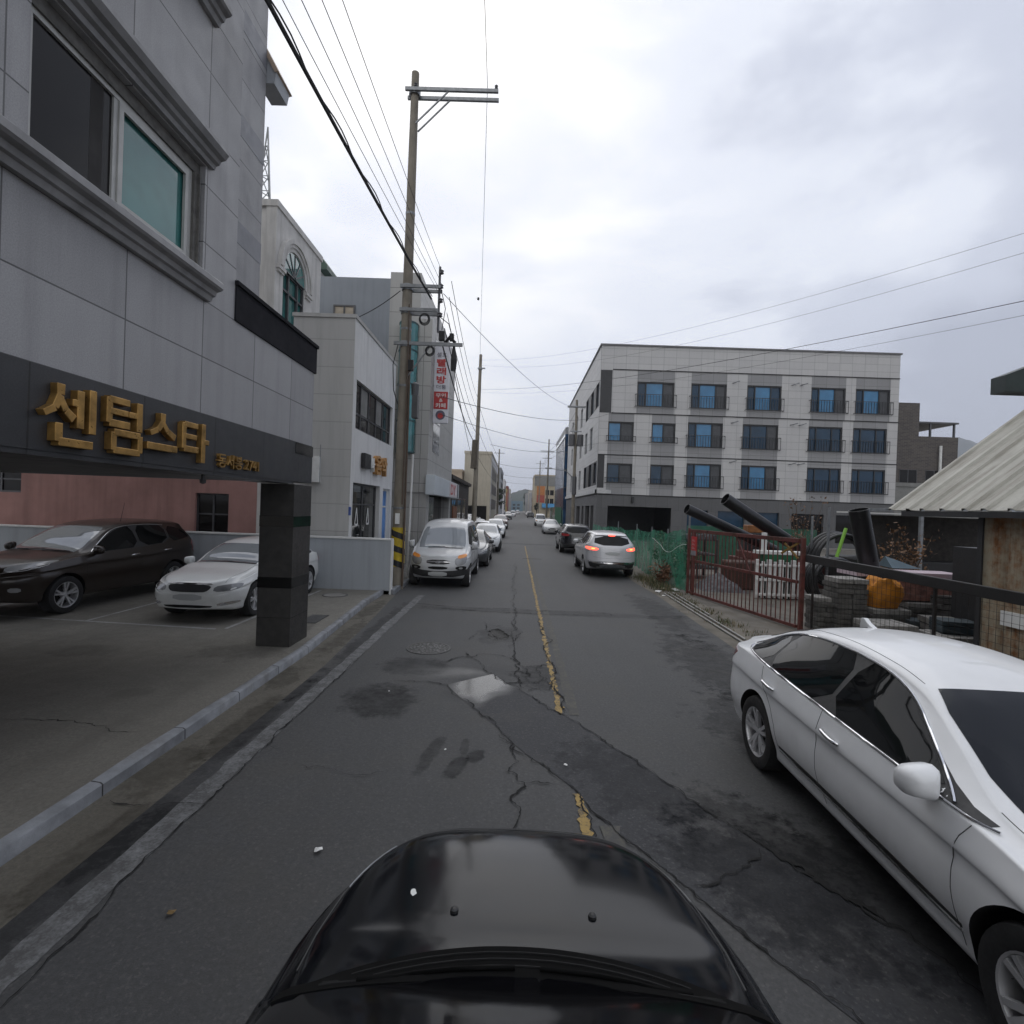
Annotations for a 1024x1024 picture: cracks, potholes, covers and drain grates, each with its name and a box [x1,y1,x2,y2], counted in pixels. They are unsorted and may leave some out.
crack [394,564,984,1024]
manhole cover [406,642,451,655]
crack [10,719,140,732]
